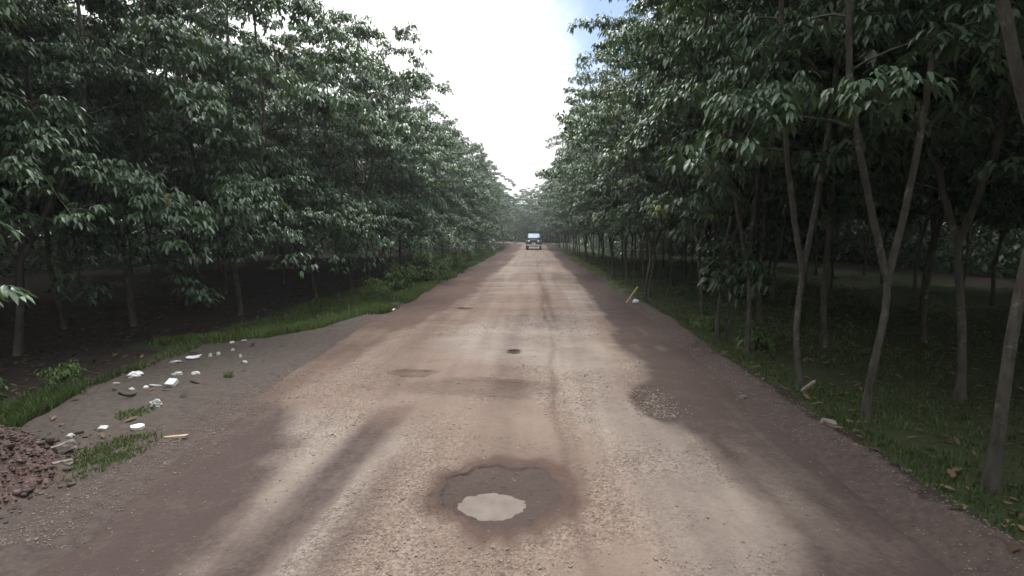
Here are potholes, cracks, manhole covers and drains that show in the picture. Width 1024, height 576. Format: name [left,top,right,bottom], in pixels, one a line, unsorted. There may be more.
pothole [426,460,576,539]
